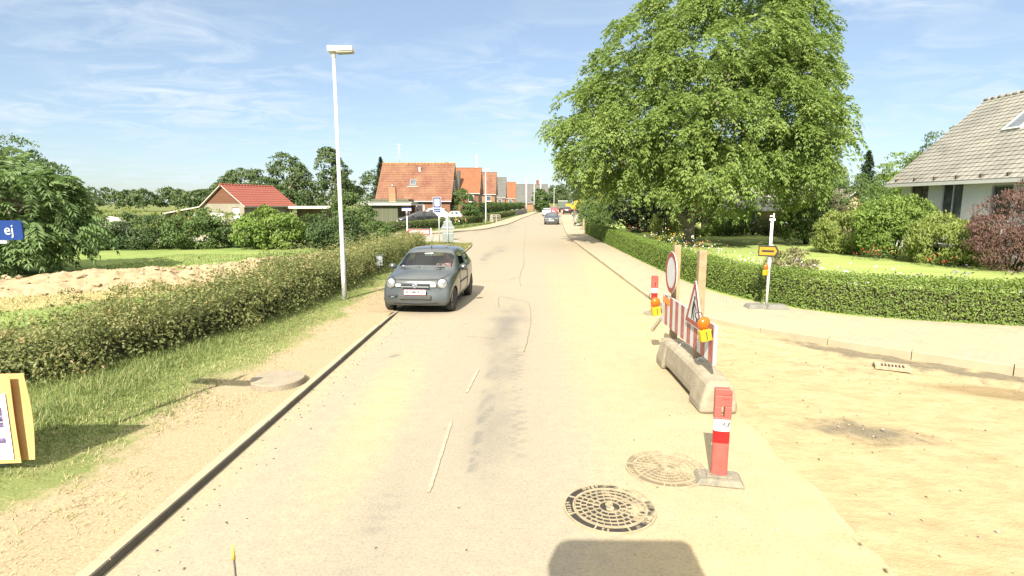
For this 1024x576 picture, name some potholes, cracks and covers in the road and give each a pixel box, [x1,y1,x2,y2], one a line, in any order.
manhole cover [564,484,657,535]
drain grate [873,361,912,374]
manhole cover [625,450,706,489]
manhole cover [250,370,306,392]
